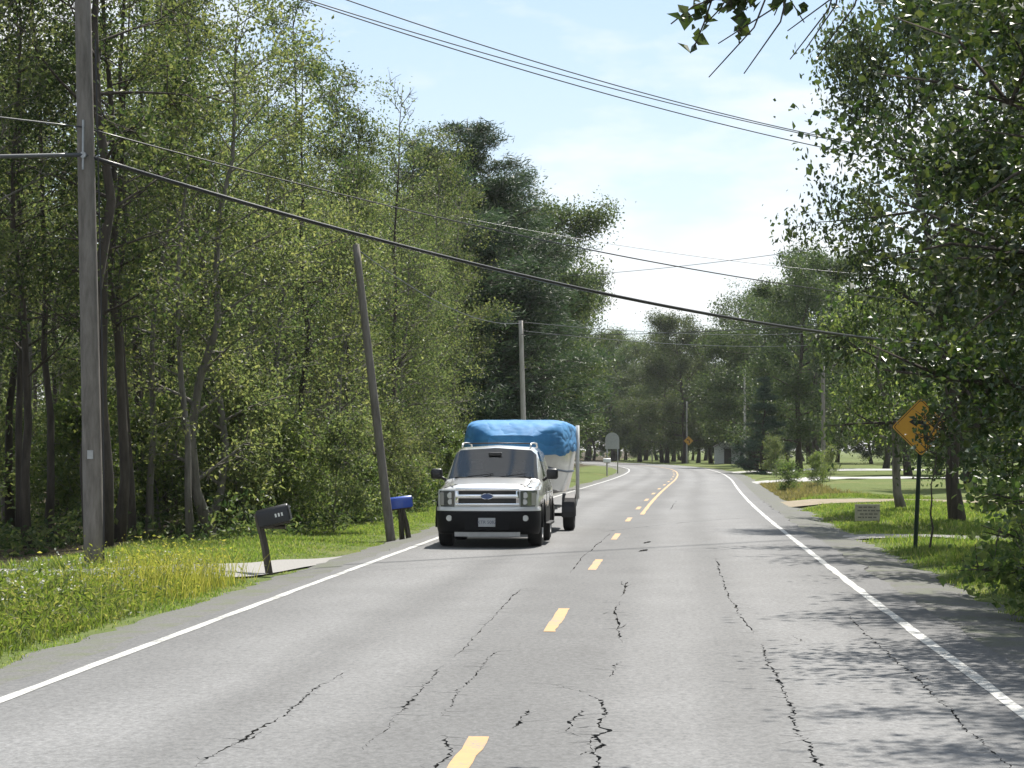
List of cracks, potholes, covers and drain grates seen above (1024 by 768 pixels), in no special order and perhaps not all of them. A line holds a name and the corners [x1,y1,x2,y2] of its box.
crack [748,644,833,767]
crack [195,673,343,767]
crack [849,616,1024,768]
crack [716,559,769,634]
crack [604,582,631,638]
crack [362,589,618,768]
